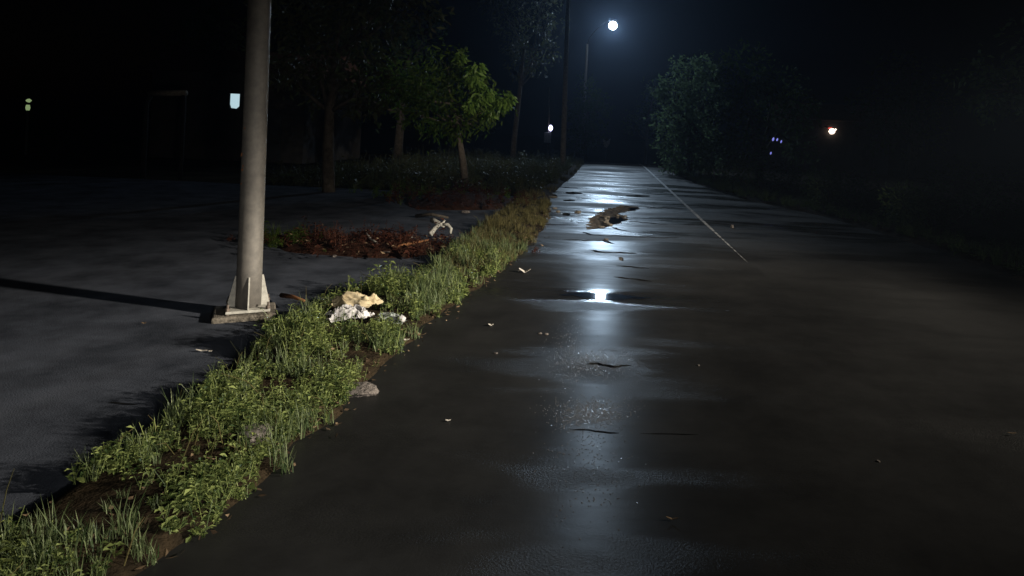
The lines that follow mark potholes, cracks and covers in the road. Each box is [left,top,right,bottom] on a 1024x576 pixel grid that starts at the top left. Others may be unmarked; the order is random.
pothole [585,205,639,230]
